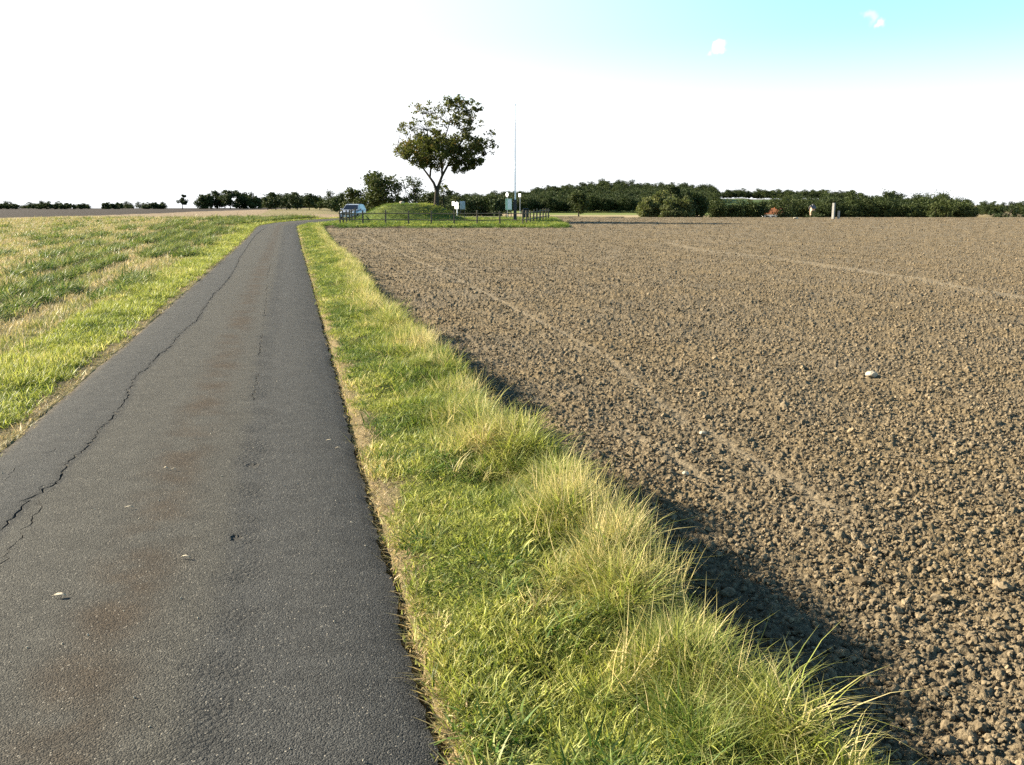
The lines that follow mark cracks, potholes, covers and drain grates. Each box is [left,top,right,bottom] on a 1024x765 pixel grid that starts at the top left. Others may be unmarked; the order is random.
crack [0,227,267,567]
